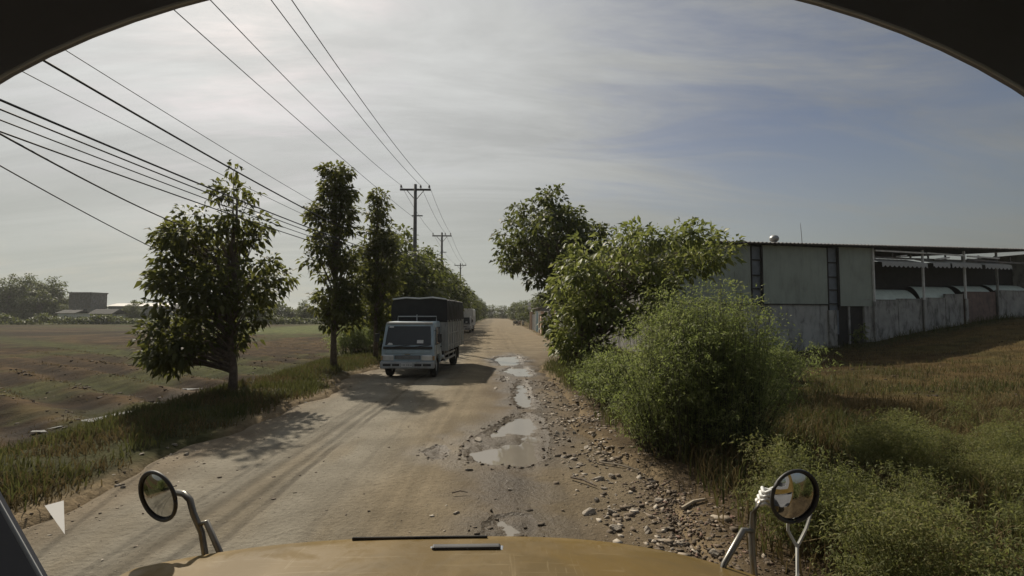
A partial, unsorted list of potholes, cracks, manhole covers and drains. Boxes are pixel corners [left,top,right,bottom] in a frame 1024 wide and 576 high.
pothole [499,366,536,377]
pothole [467,508,546,537]
pothole [492,354,525,366]
pothole [508,379,541,410]
pothole [416,444,461,460]
pothole [455,412,558,470]
